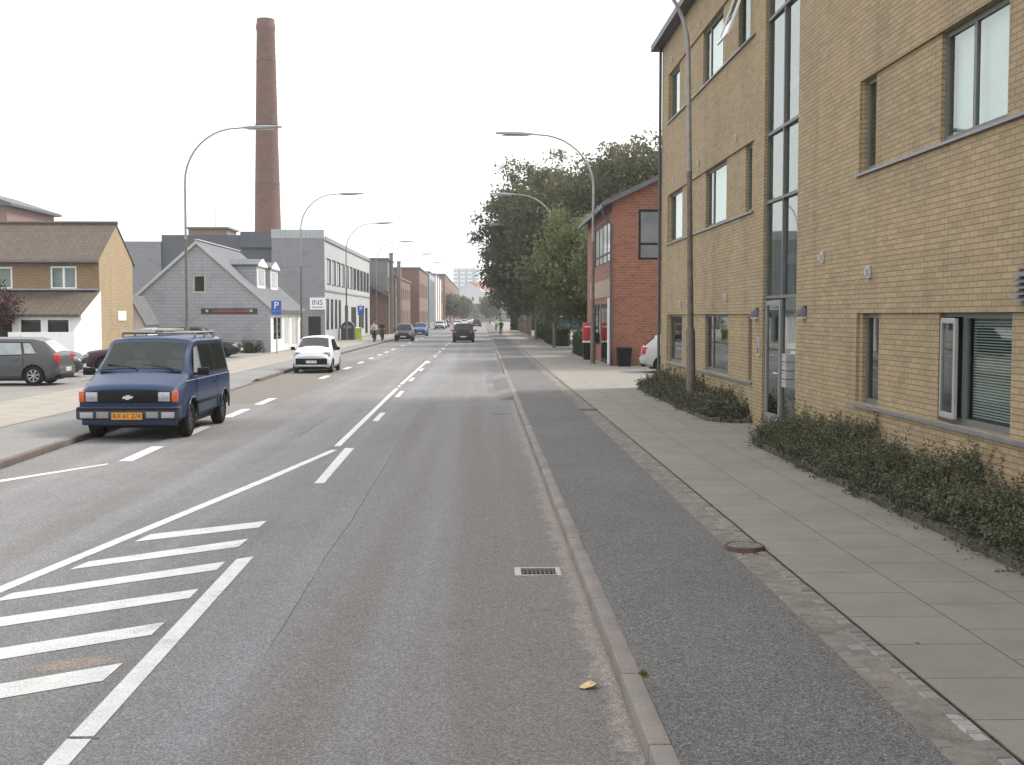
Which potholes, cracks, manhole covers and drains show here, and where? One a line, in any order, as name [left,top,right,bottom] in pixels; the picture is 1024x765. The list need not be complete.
manhole cover [724,541,767,555]
drain grate [514,567,562,576]
